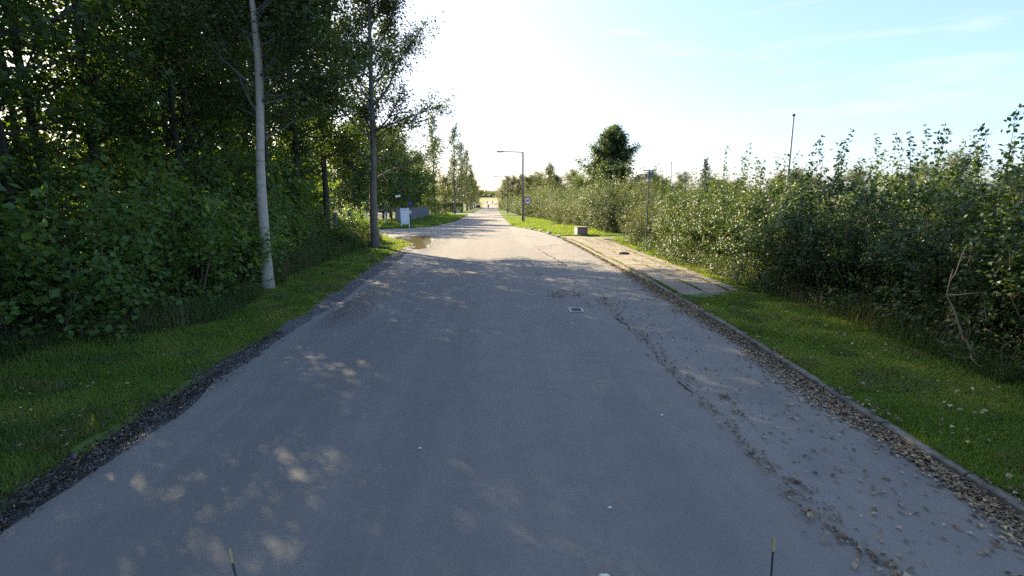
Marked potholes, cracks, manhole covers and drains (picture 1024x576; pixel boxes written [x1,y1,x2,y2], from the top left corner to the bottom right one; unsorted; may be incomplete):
crack [614,318,692,392]
